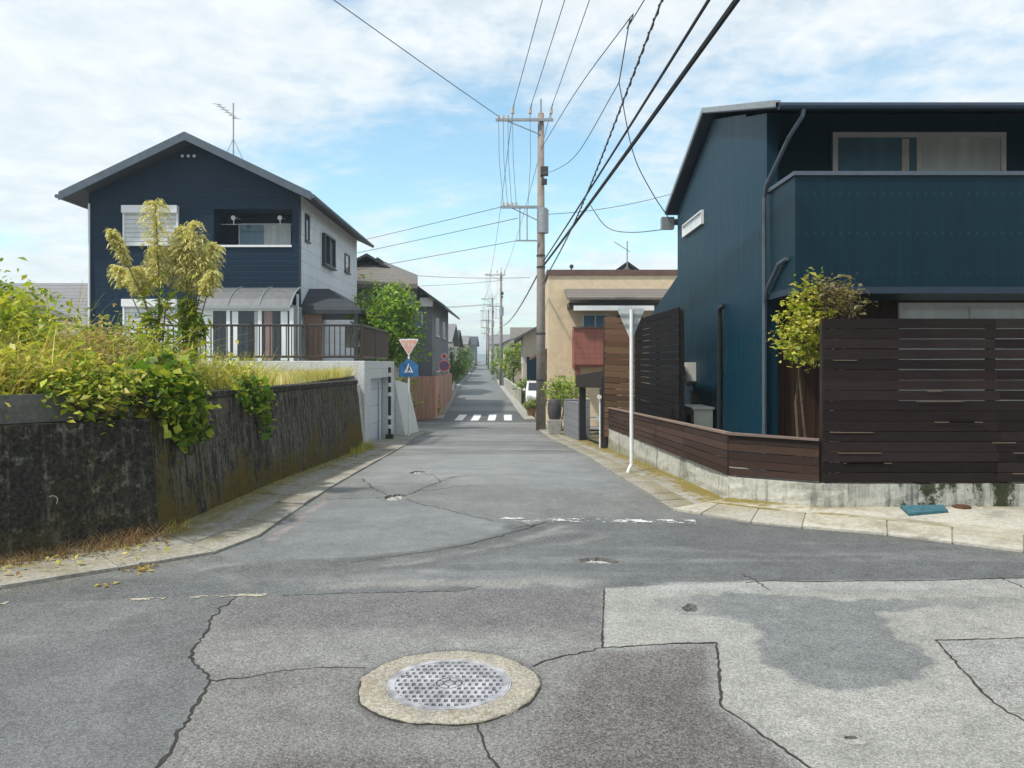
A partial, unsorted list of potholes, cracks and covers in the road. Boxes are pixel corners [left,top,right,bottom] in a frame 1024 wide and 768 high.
pothole [571,556,625,565]
pothole [377,493,412,502]
crack [345,473,492,521]
crack [155,597,366,768]
manhole cover [358,651,541,725]
pothole [674,601,705,615]
